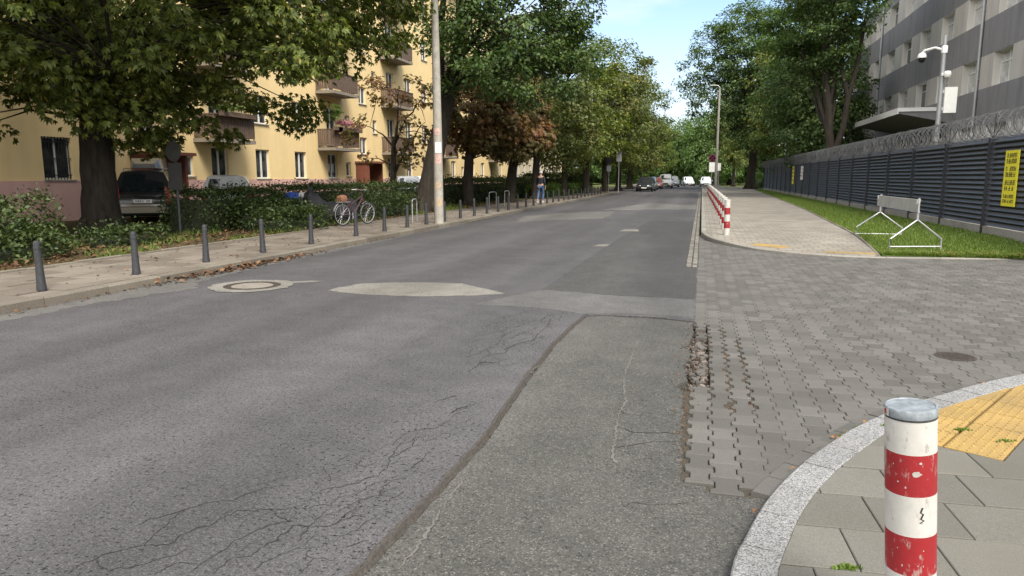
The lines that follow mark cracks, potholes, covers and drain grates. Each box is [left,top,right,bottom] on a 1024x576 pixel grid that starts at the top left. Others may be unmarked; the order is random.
crack [64,402,480,575]
manhole cover [934,352,977,362]
pothole [680,328,710,392]
crack [611,340,687,474]
crack [467,311,576,377]
